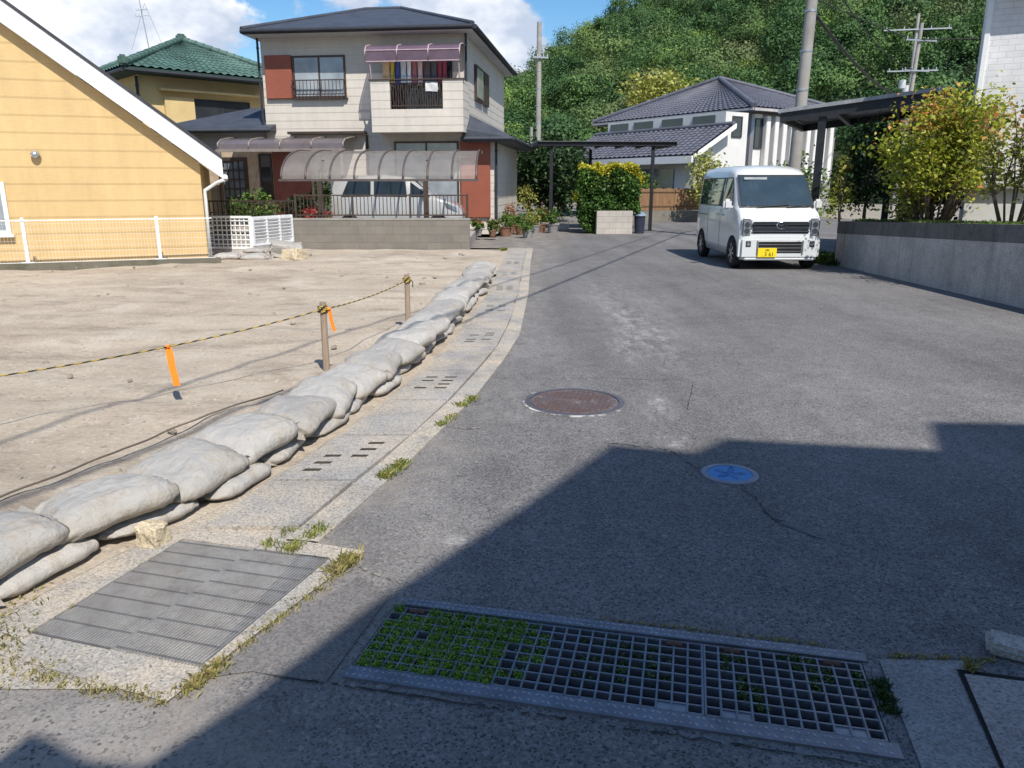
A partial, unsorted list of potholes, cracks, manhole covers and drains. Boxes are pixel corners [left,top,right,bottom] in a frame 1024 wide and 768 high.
crack [617,443,834,542]
drain grate [354,605,704,716]
drain grate [703,644,889,742]
manhole cover [522,388,627,417]
drain grate [31,540,328,667]
utility cover [701,463,759,485]
